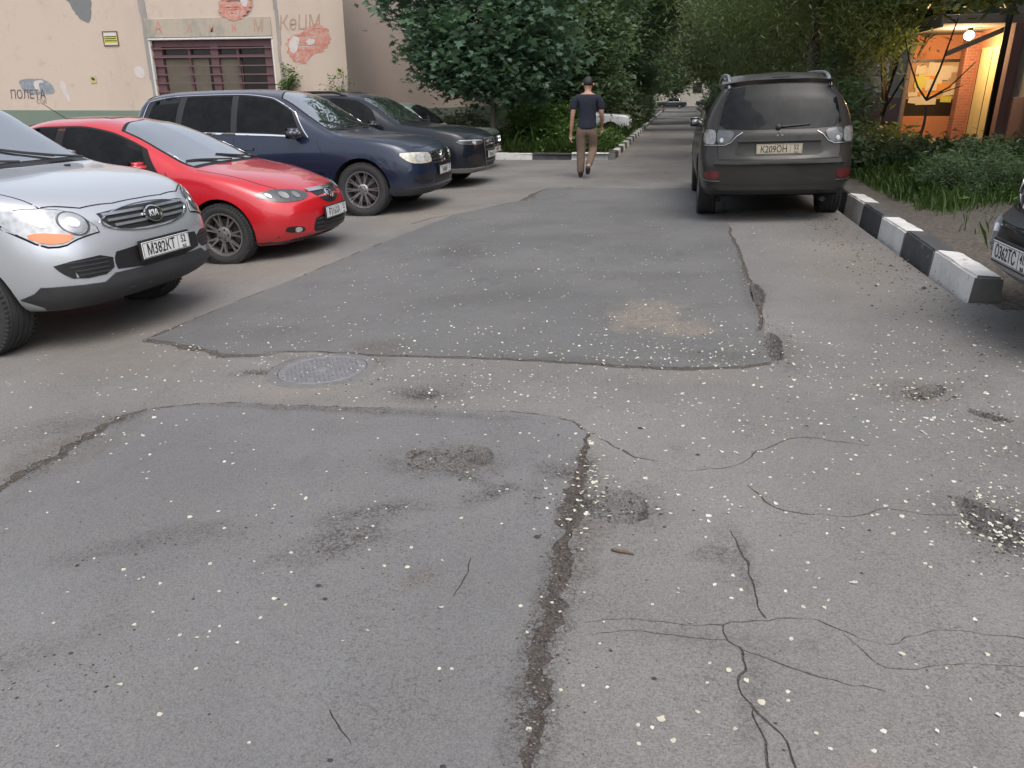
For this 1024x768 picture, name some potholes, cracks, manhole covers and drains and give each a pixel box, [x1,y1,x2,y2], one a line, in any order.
pothole [897,384,946,400]
crack [592,532,1024,768]
pothole [953,496,1024,558]
crack [143,245,770,371]
pothole [581,489,650,524]
crack [606,441,657,462]
pothole [405,444,494,469]
pothole [966,408,1014,423]
crack [748,486,952,517]
pothole [763,332,784,361]
crack [728,227,763,330]
crack [696,437,868,471]
